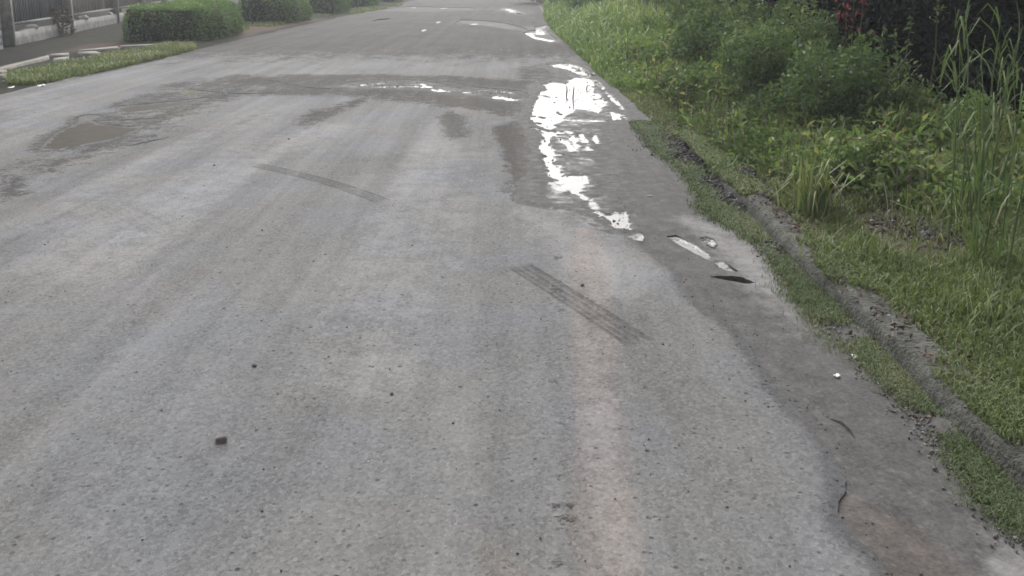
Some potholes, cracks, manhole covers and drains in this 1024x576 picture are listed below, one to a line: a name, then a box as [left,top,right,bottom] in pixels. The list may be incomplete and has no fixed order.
pothole [38,114,149,150]
